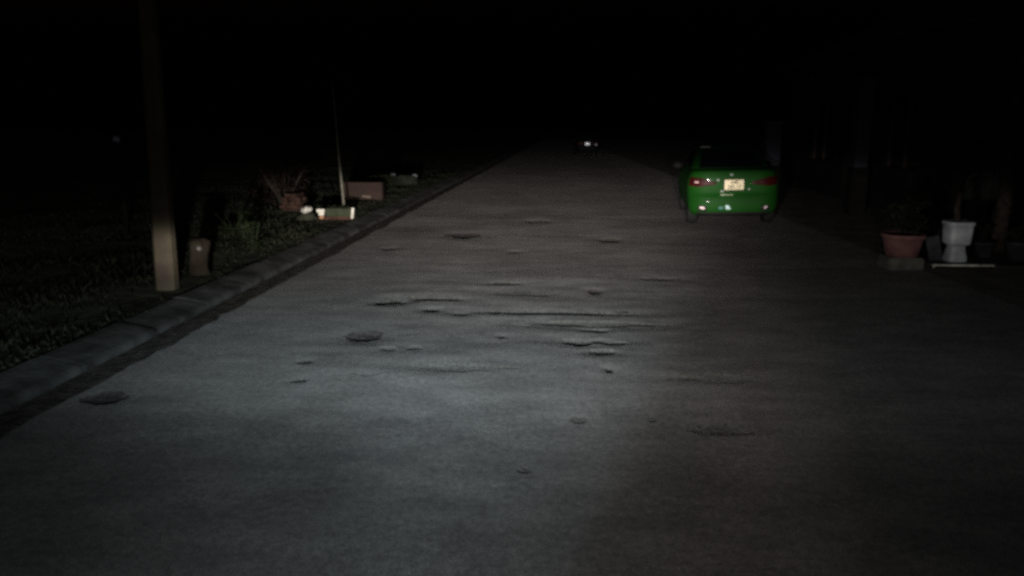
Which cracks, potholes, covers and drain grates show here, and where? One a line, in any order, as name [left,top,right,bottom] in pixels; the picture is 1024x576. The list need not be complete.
pothole [78,391,130,405]
pothole [556,337,631,347]
pothole [516,466,535,474]
pothole [523,320,680,328]
pothole [569,416,588,424]
pothole [344,330,384,342]
pothole [686,423,761,436]
